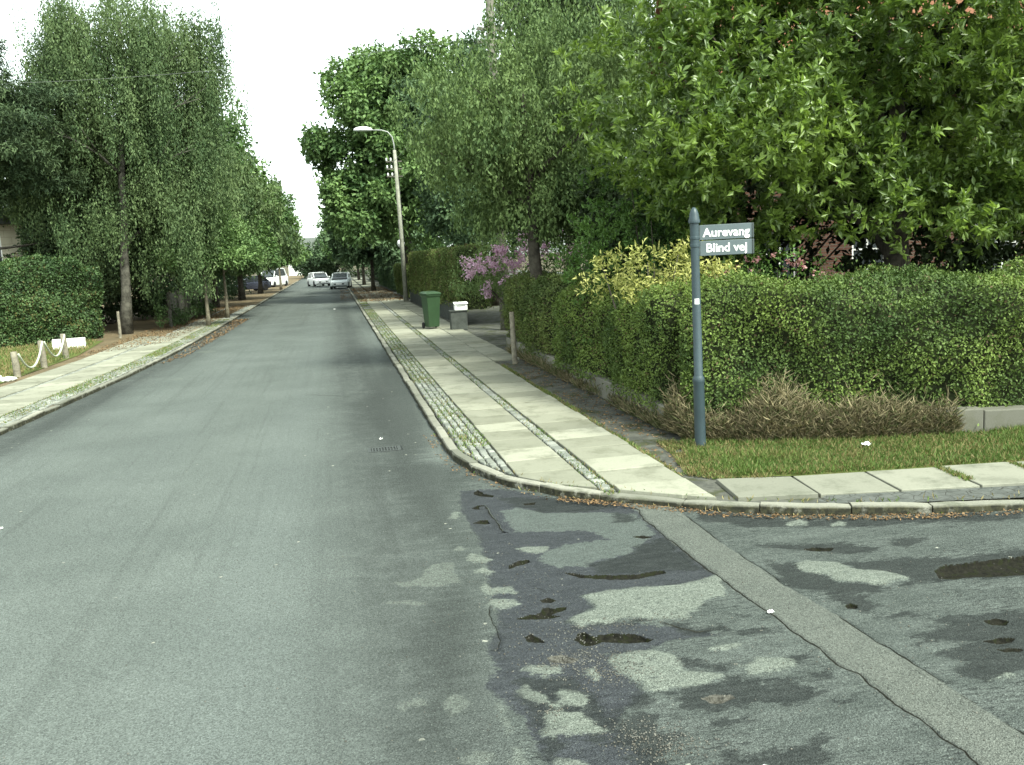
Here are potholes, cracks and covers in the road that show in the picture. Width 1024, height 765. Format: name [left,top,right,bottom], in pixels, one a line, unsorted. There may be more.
pothole [928,554,1024,581]
pothole [470,488,499,498]
pothole [976,635,1022,647]
pothole [510,604,574,623]
pothole [517,631,554,646]
pothole [566,630,662,649]
pothole [557,569,672,582]
pothole [798,545,838,553]
pothole [503,558,536,571]
crack [479,505,508,534]
drain grate [367,445,402,453]
pothole [976,616,1019,628]
